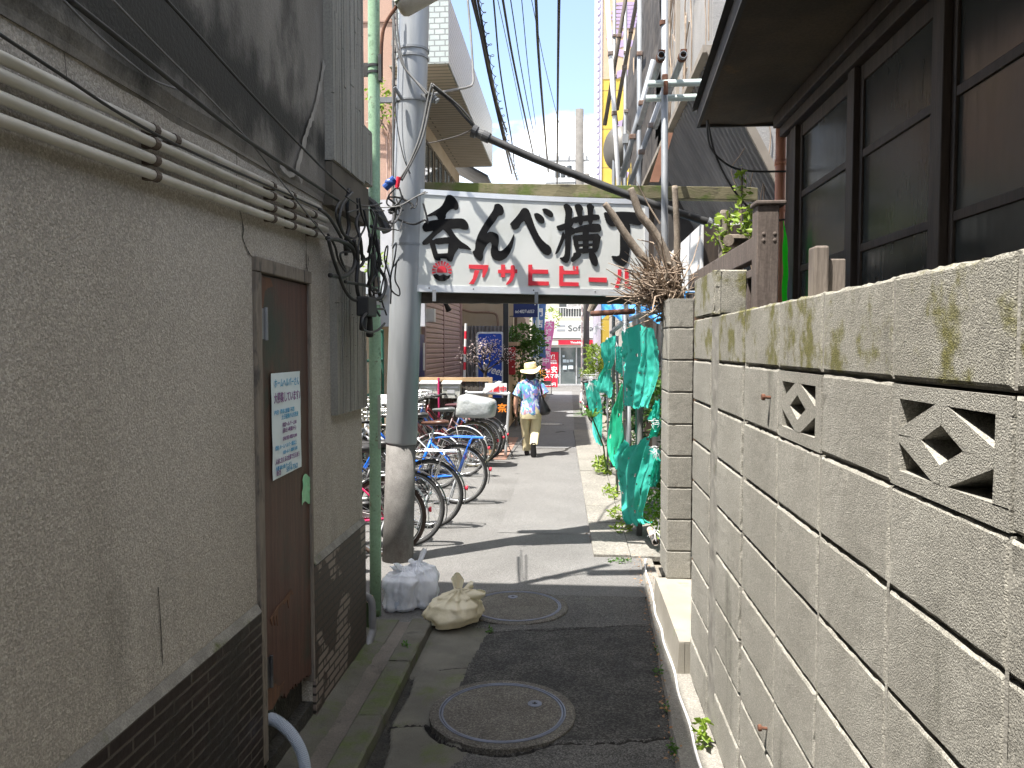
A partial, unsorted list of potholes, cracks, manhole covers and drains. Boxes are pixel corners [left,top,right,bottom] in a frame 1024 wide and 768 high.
manhole cover [429,680,576,757]
manhole cover [479,590,568,625]
crack [387,724,669,758]
